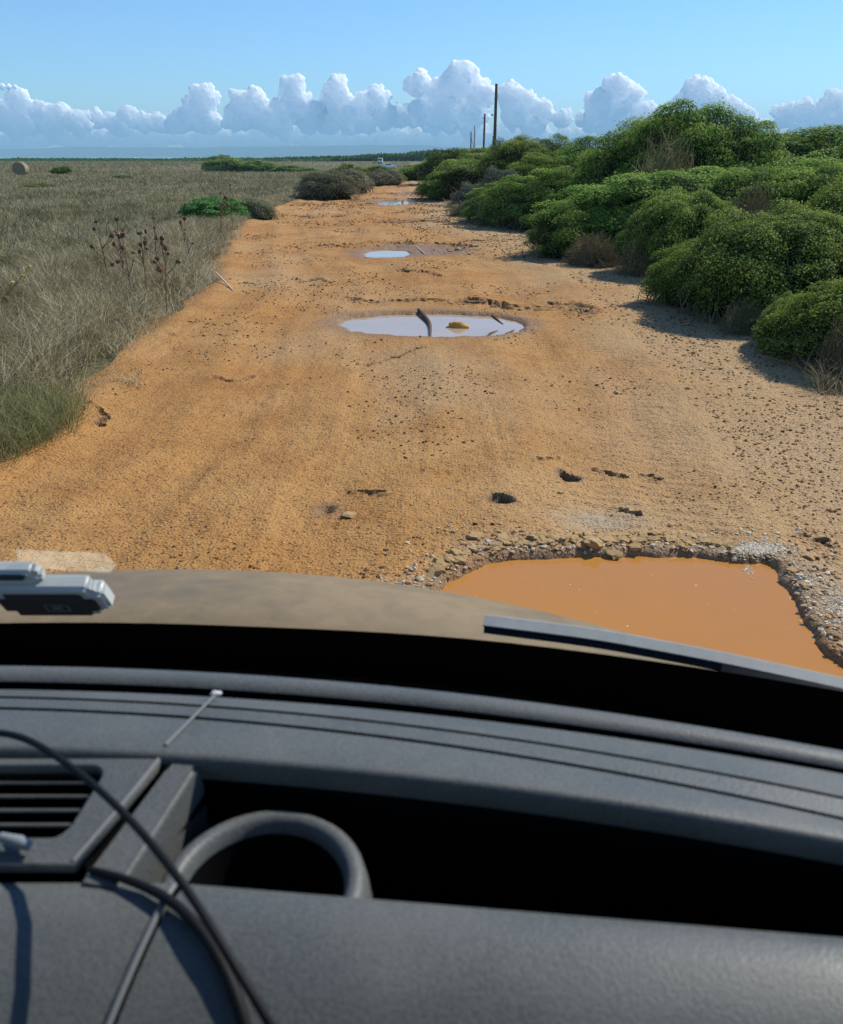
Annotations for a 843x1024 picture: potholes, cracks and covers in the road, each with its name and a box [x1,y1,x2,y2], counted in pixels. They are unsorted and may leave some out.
pothole [322,309,536,338]
pothole [485,493,517,504]
pothole [352,244,474,258]
pothole [422,545,843,677]
pothole [556,467,582,483]
